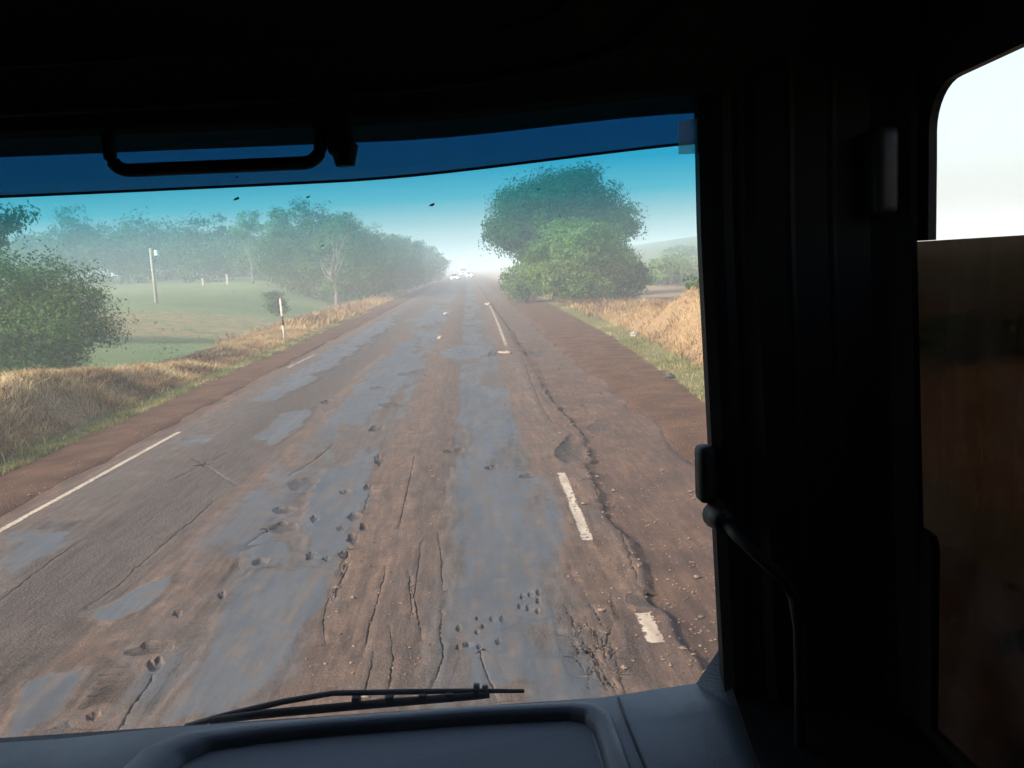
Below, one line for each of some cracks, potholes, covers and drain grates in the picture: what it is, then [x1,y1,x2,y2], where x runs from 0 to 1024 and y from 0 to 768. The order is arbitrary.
crack [277,443,512,705]
pothole [275,474,332,494]
crack [0,451,280,610]
pothole [527,596,555,607]
crack [551,463,658,698]
pothole [506,589,528,602]
pothole [324,522,354,536]
pothole [334,530,371,549]
pothole [107,635,190,663]
crack [102,666,168,731]
pothole [543,432,598,466]
pothole [260,503,310,517]
